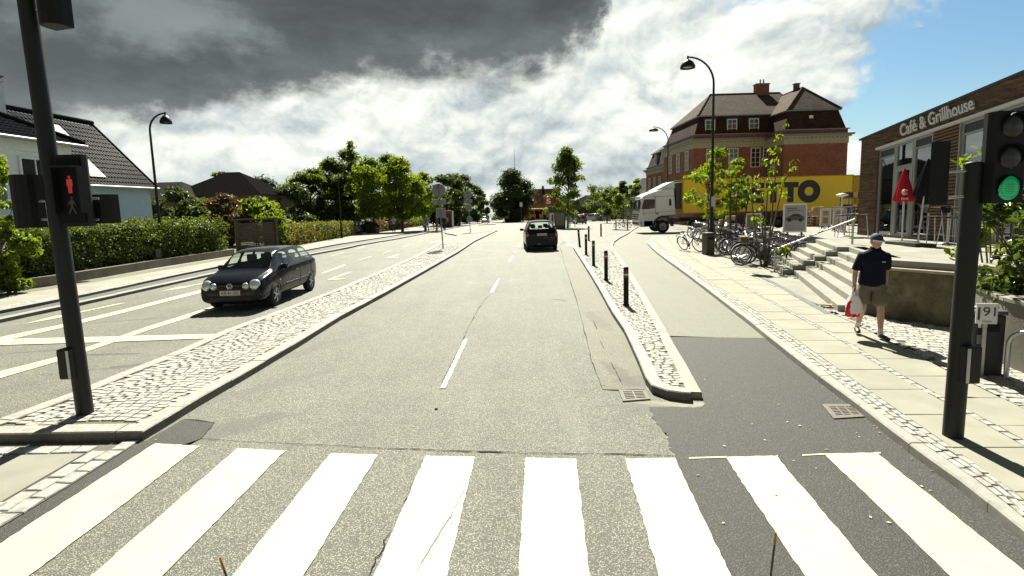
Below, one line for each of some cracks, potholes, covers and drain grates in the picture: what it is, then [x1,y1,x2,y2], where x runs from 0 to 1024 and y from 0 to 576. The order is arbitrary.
drain grate [619,390,651,402]
crack [368,460,466,576]
drain grate [821,404,865,419]
